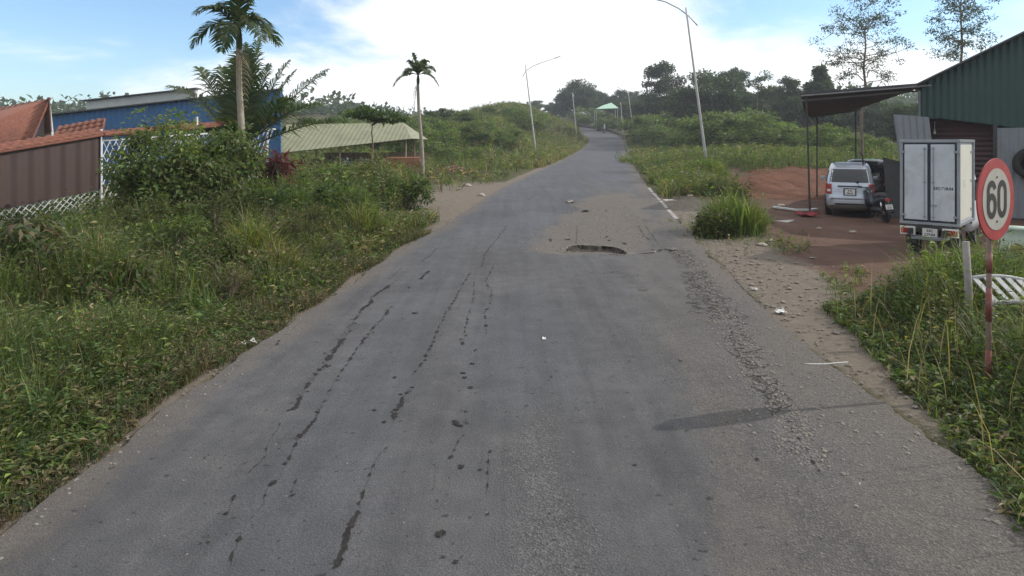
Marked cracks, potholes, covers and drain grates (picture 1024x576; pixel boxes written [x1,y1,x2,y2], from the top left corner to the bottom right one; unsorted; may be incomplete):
crack [332,447,387,568]
crack [638,226,821,477]
crack [391,228,506,421]
crack [249,268,402,513]
pothole [563,244,631,255]
